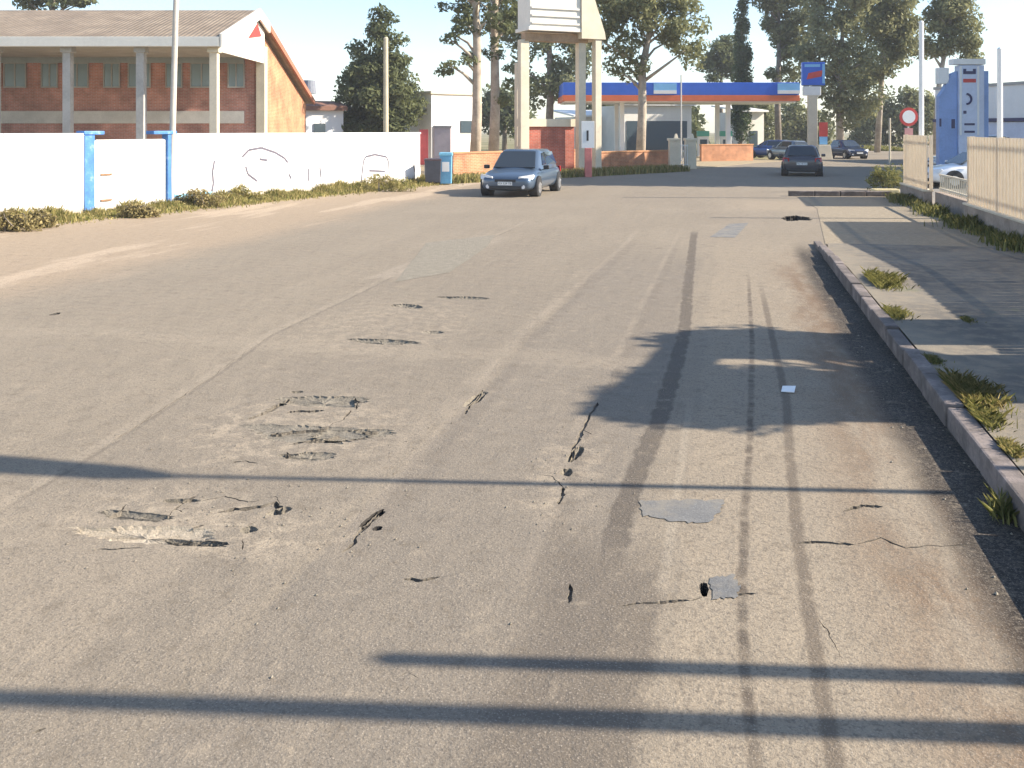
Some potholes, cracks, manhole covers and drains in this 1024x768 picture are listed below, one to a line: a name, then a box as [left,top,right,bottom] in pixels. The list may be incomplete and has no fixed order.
pothole [699,582,709,597]
pothole [277,452,337,461]
crack [399,577,439,692]
pothole [238,424,371,445]
pothole [100,510,174,522]
pothole [273,395,369,408]
pothole [310,429,396,442]
crack [796,537,984,549]
pothole [165,539,226,547]
pothole [266,506,292,516]
crack [619,593,756,607]
